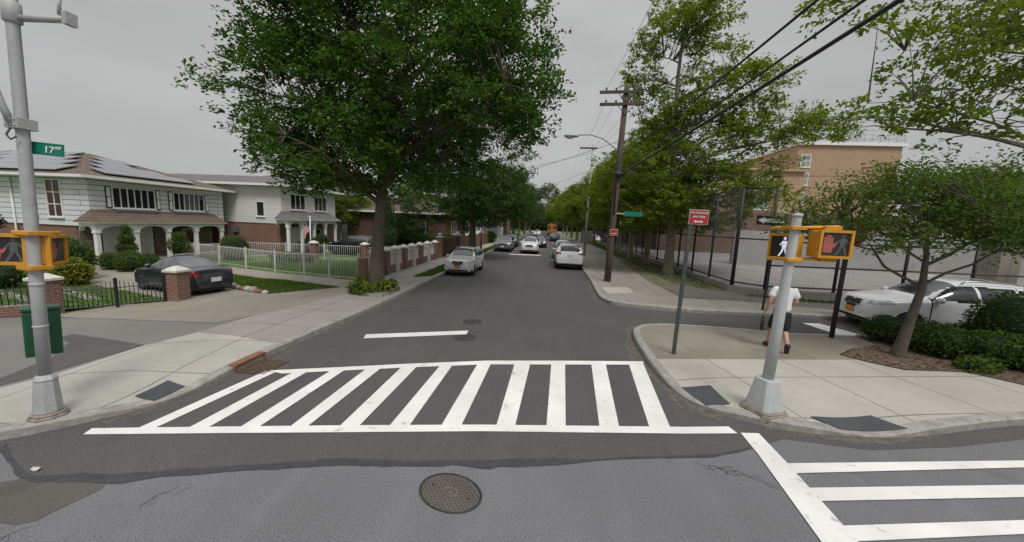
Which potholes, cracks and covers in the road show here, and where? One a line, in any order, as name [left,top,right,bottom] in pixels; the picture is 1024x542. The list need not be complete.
manhole cover [419,473,482,514]
crack [139,486,193,510]
drain grate [227,351,290,375]
crack [693,462,780,490]
